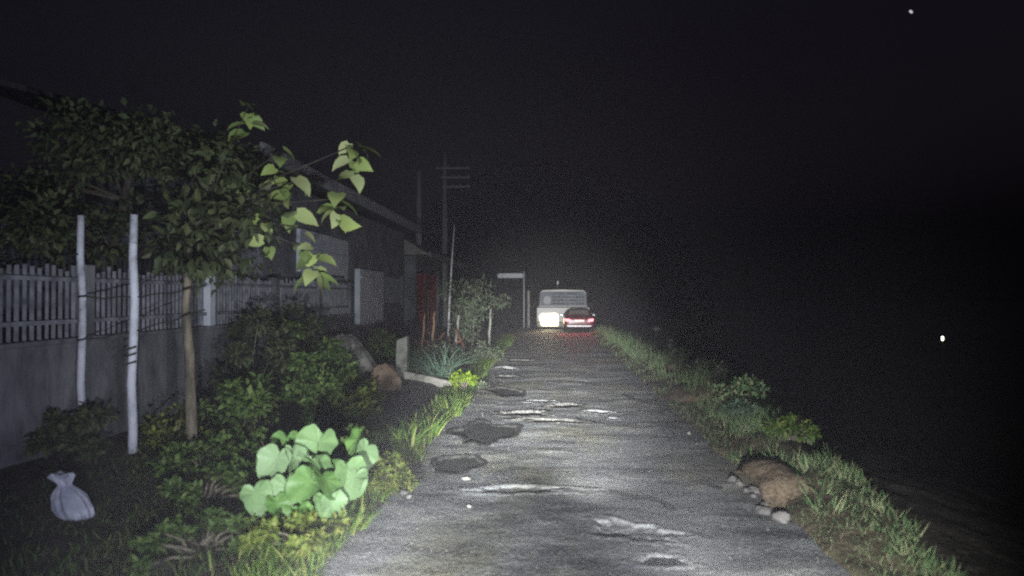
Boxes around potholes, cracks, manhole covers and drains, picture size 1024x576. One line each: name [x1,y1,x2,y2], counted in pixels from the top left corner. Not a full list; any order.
pothole [500,417,606,425]
pothole [615,551,708,569]
pothole [445,418,524,446]
pothole [481,385,528,398]
pothole [429,453,489,475]
pothole [578,515,709,547]
pothole [428,483,609,496]
pothole [487,409,555,417]
